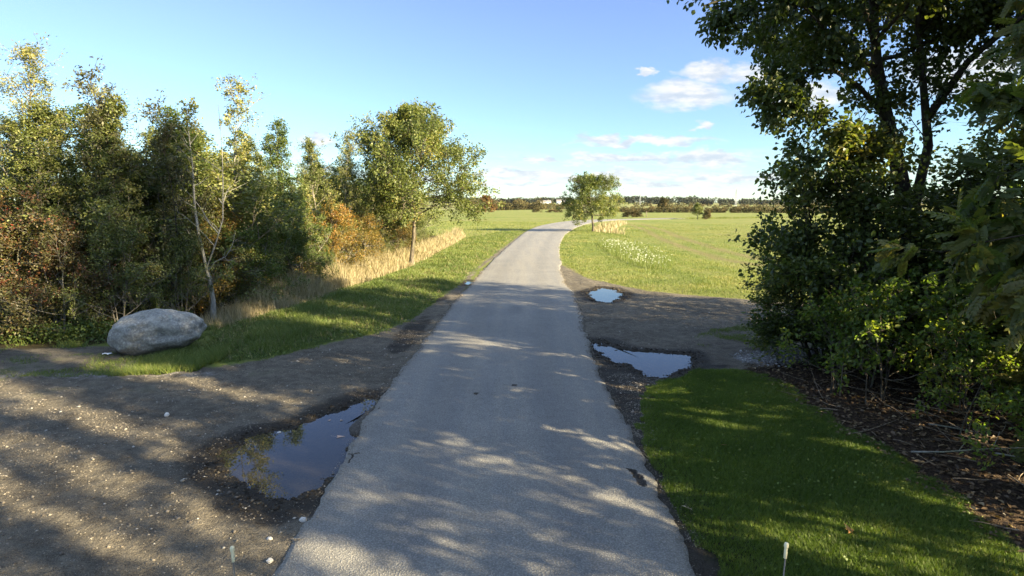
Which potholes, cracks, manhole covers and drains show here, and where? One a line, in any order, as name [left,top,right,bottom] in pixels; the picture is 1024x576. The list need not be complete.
pothole [590,339,697,378]
pothole [626,468,647,487]
pothole [203,396,380,508]
